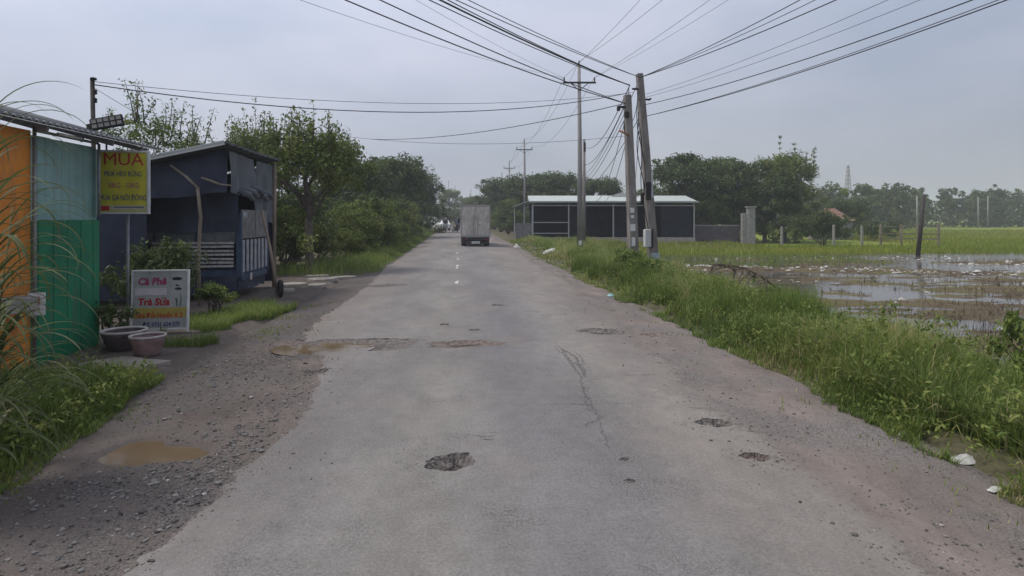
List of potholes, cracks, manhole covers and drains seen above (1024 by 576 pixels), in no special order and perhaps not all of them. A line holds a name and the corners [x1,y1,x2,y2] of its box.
pothole [729,450,779,465]
pothole [686,416,741,429]
crack [527,340,616,446]
pothole [617,477,643,485]
pothole [413,449,486,475]
